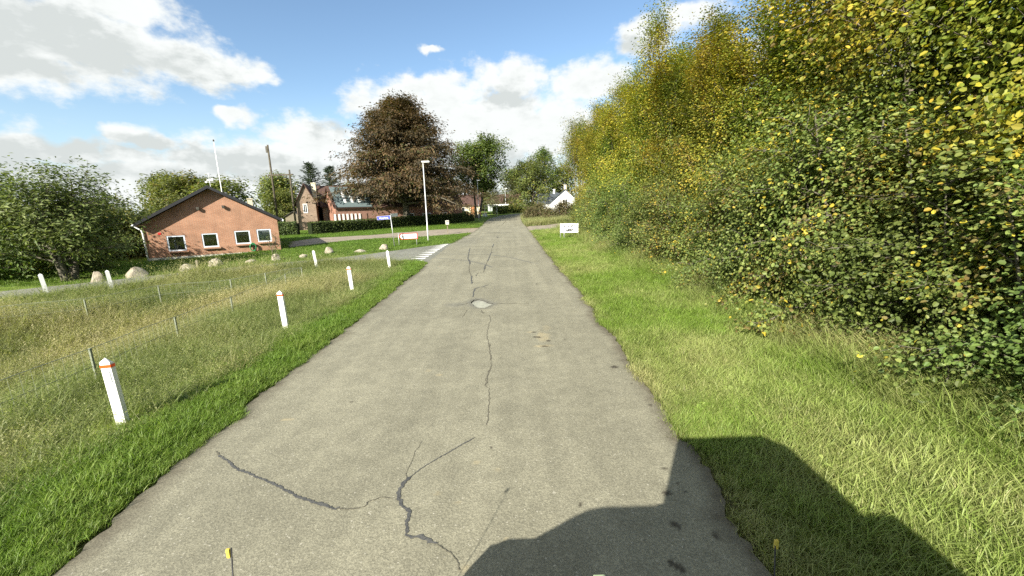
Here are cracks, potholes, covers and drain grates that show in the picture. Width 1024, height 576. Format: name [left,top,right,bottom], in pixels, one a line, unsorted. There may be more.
pothole [468,299,496,309]
crack [461,303,528,425]
